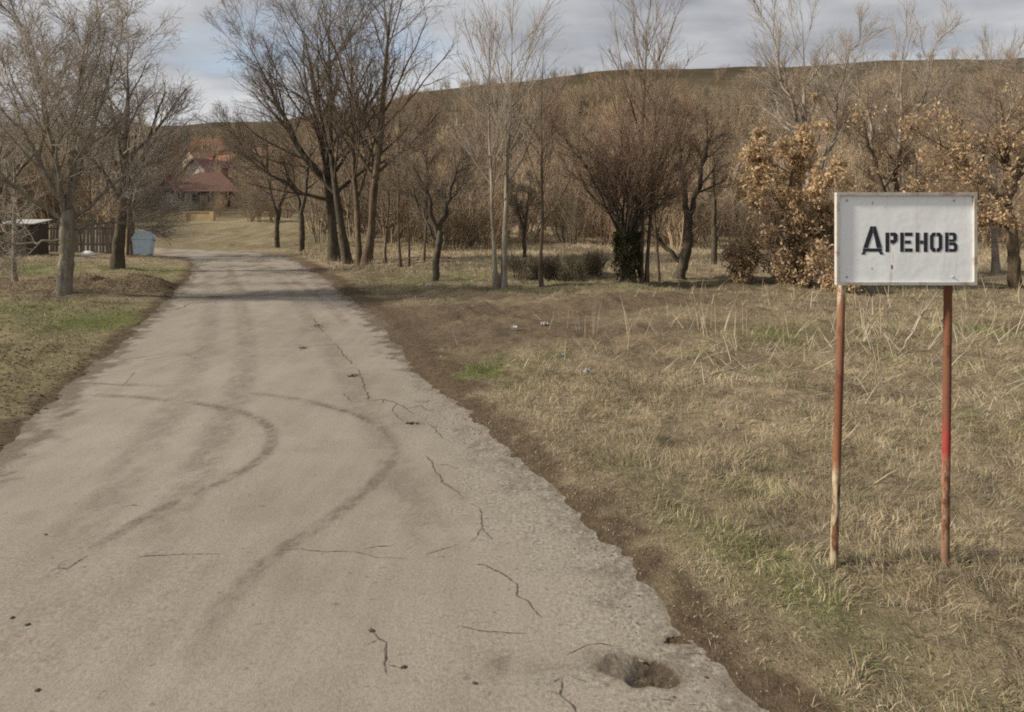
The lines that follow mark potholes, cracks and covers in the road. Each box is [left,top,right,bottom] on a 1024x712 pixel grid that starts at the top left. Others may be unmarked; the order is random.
crack [426,456,491,540]
crack [367,627,397,675]
crack [463,564,551,634]
crack [297,318,442,437]
crack [148,545,454,558]
crack [551,676,576,712]
pothole [559,638,725,705]
